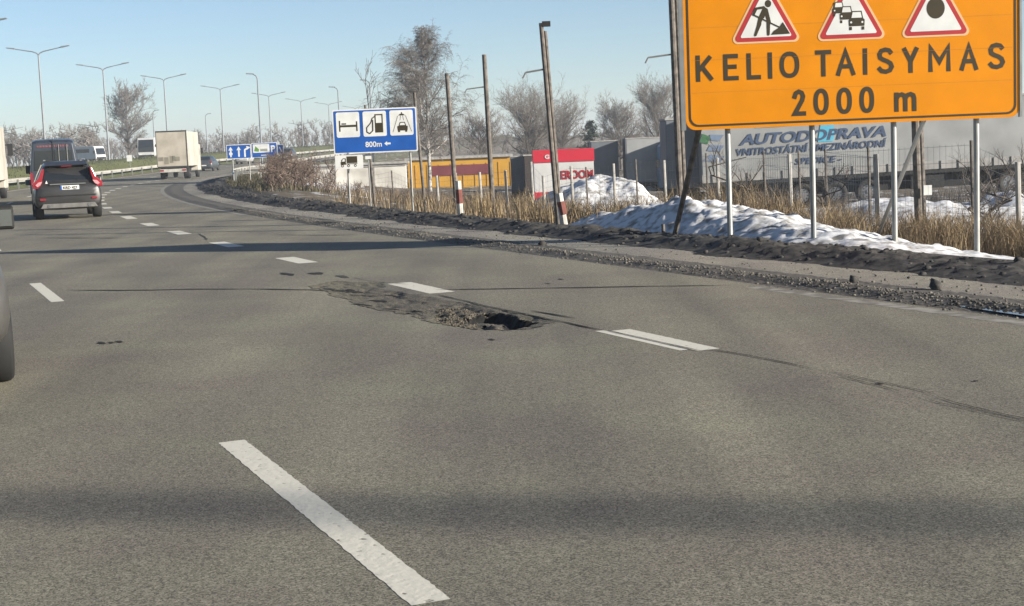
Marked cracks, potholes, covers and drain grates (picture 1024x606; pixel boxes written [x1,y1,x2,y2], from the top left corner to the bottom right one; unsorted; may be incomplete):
pothole [461,313,538,330]
